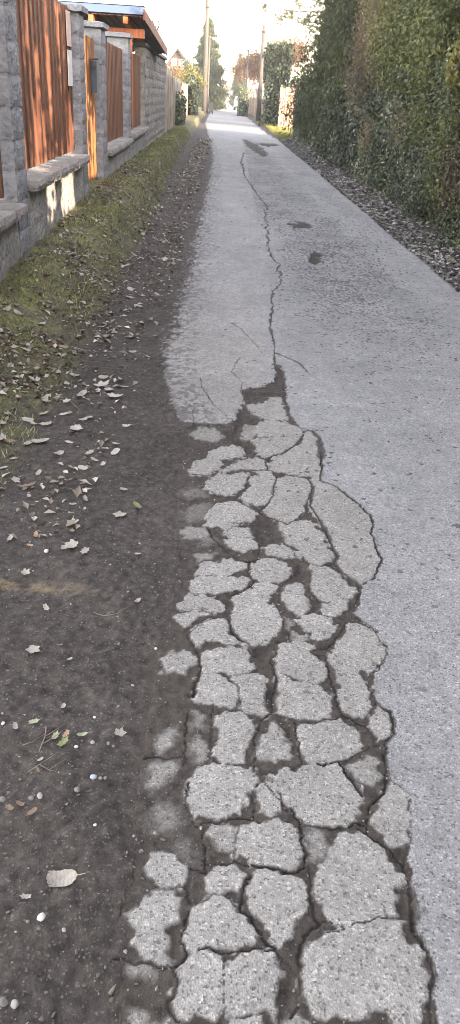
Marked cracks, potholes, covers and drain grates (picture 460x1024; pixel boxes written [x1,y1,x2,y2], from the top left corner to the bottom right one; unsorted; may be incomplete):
pothole [245,390,275,403]
crack [109,323,437,1024]
